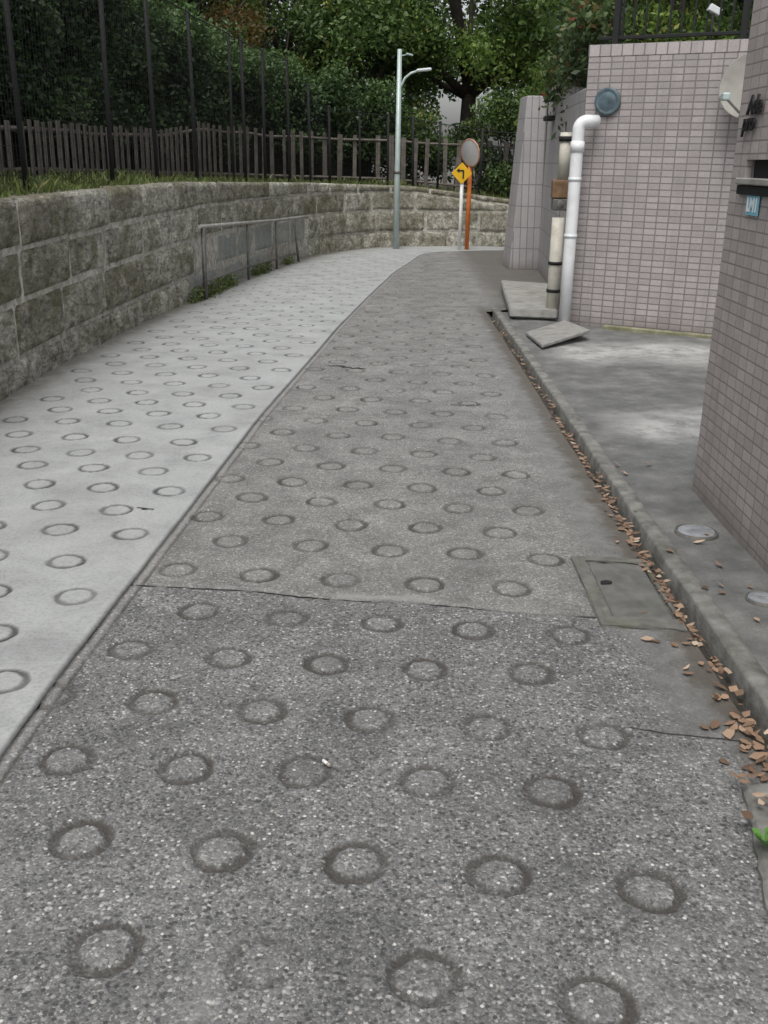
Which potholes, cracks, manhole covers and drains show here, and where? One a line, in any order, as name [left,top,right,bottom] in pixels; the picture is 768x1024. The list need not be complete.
crack [628,727,740,741]
manhole cover [571,556,688,632]
manhole cover [745,591,768,608]
manhole cover [674,523,719,541]
